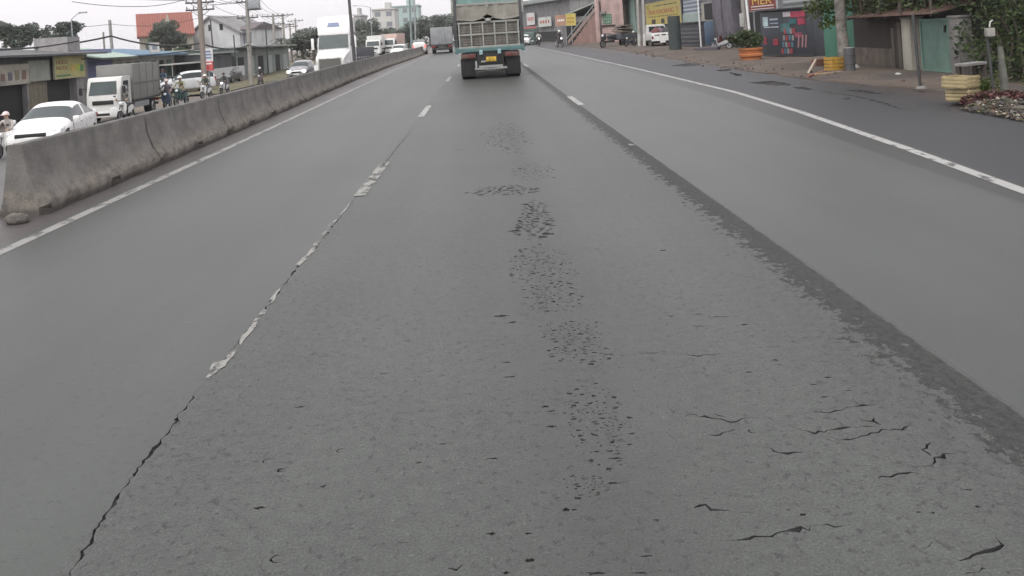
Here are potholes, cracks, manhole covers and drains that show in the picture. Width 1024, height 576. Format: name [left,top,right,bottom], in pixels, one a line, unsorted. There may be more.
pothole [467,185,539,196]
crack [959,536,1005,574]
crack [694,504,842,541]
crack [686,404,956,481]
pothole [508,200,556,238]
pothole [563,383,634,471]
pothole [522,283,584,314]
pothole [539,319,598,345]
pothole [547,341,616,365]
pothole [509,244,576,290]
